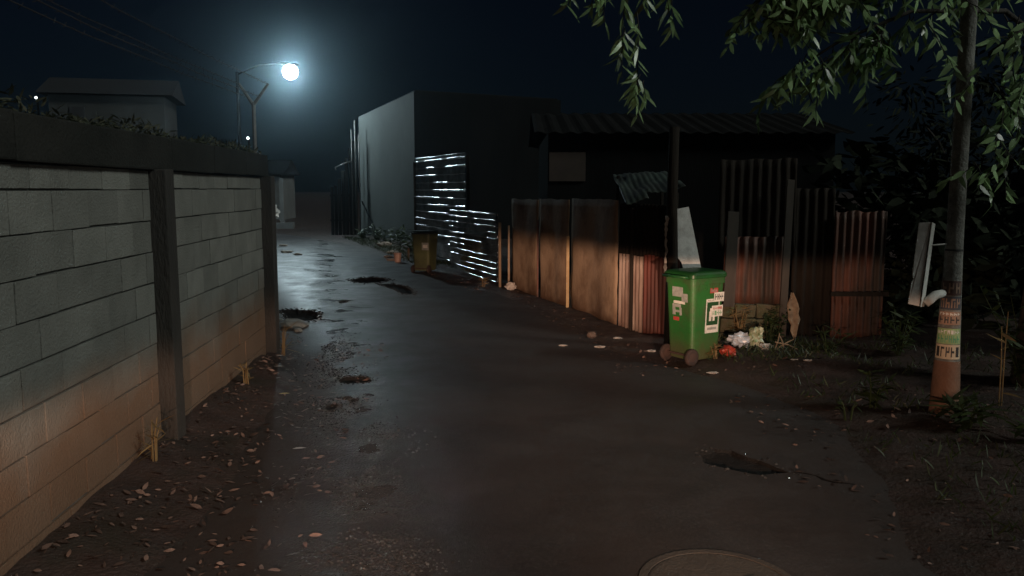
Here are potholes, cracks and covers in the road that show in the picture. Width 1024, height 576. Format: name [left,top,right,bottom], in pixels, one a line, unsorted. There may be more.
manhole cover [639,549,791,576]
pothole [381,284,412,294]
pothole [280,310,318,321]
pothole [698,449,787,475]
